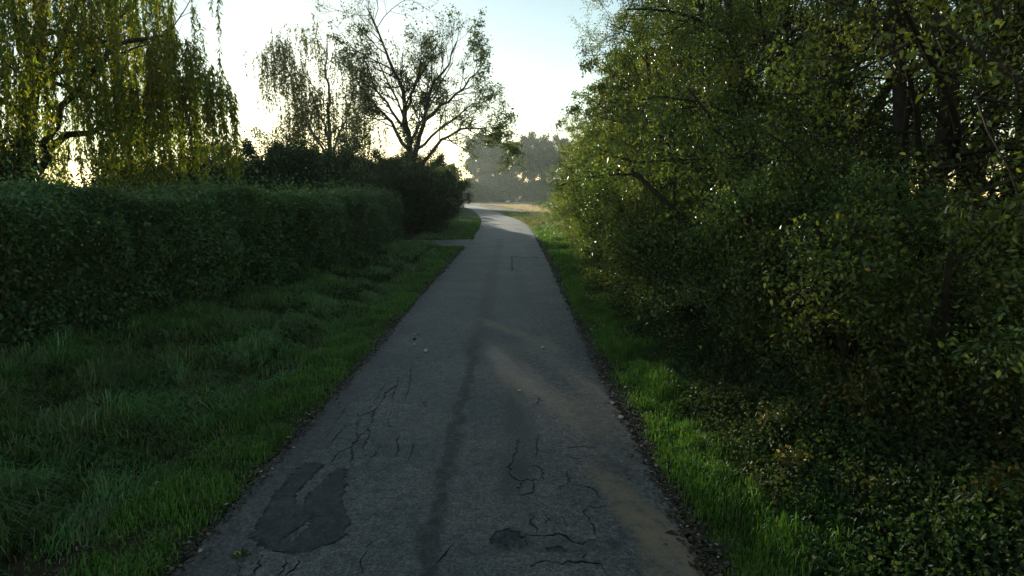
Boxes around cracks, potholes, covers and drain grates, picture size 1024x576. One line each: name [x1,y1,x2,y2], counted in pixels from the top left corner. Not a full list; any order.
crack [507,434,611,570]
crack [327,368,427,471]
